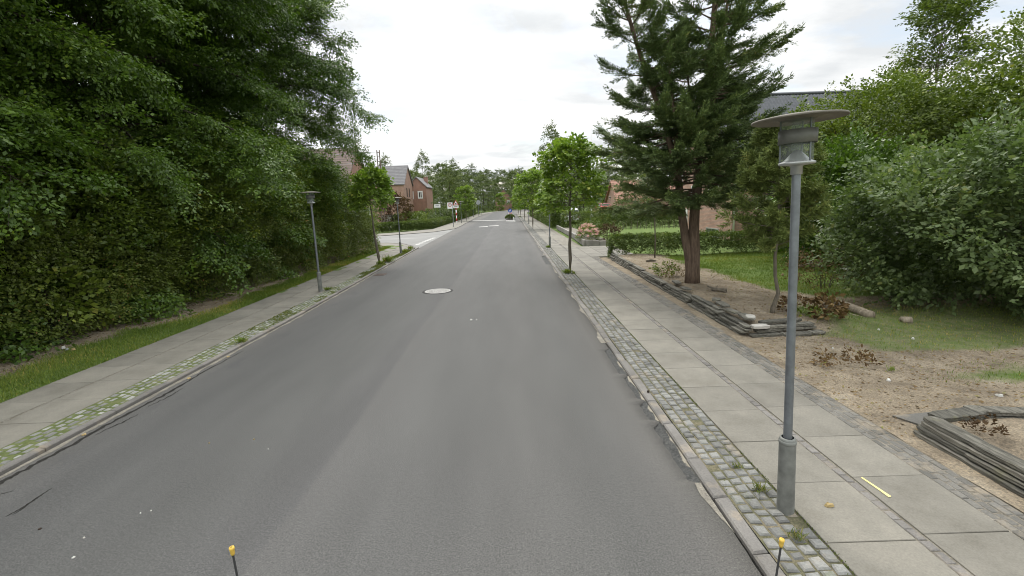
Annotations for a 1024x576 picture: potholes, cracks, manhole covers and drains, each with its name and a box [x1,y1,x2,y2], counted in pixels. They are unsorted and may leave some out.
crack [0,354,237,516]
